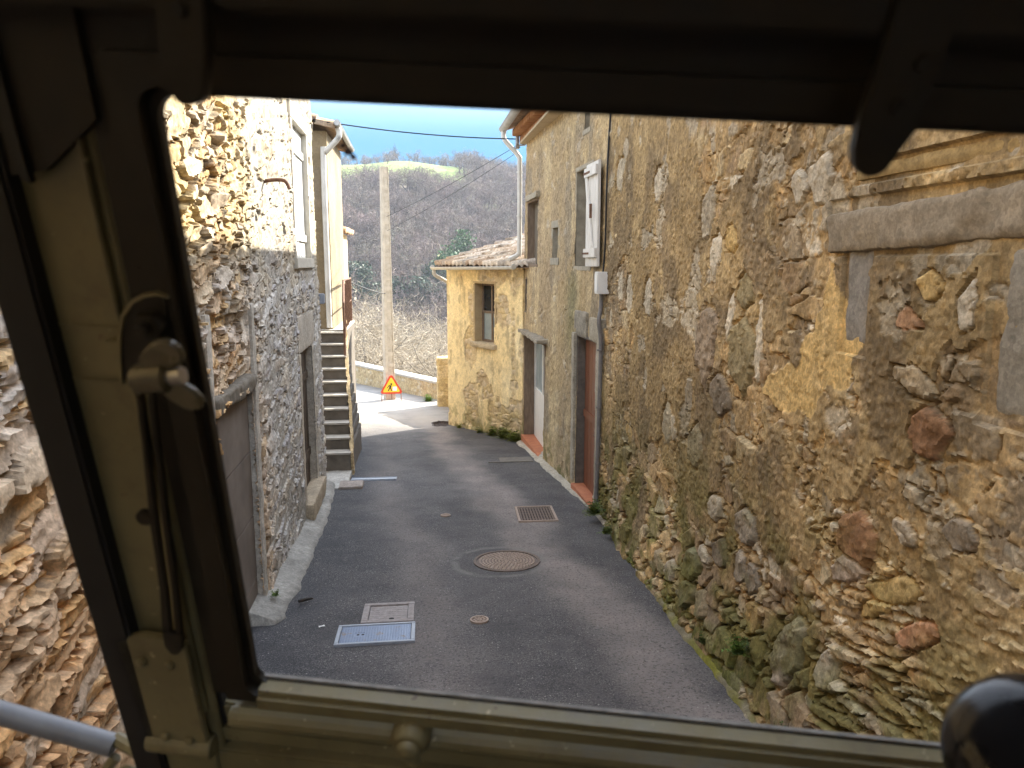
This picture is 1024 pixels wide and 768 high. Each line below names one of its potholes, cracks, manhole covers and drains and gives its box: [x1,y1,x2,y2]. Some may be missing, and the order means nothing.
manhole cover [334,621,415,648]
drain grate [514,505,559,523]
manhole cover [470,615,489,624]
manhole cover [361,601,415,624]
manhole cover [473,550,540,572]
